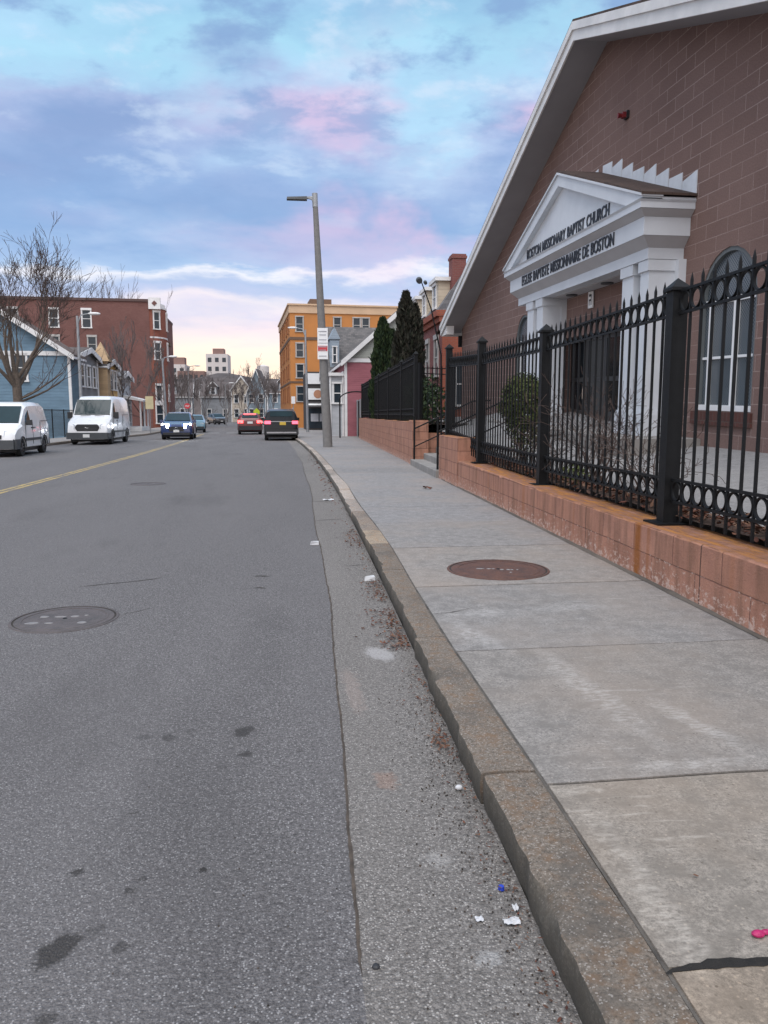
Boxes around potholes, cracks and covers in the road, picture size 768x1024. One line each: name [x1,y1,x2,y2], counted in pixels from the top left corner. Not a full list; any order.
manhole cover [8,606,120,634]
crack [666,957,768,974]
manhole cover [447,559,550,581]
